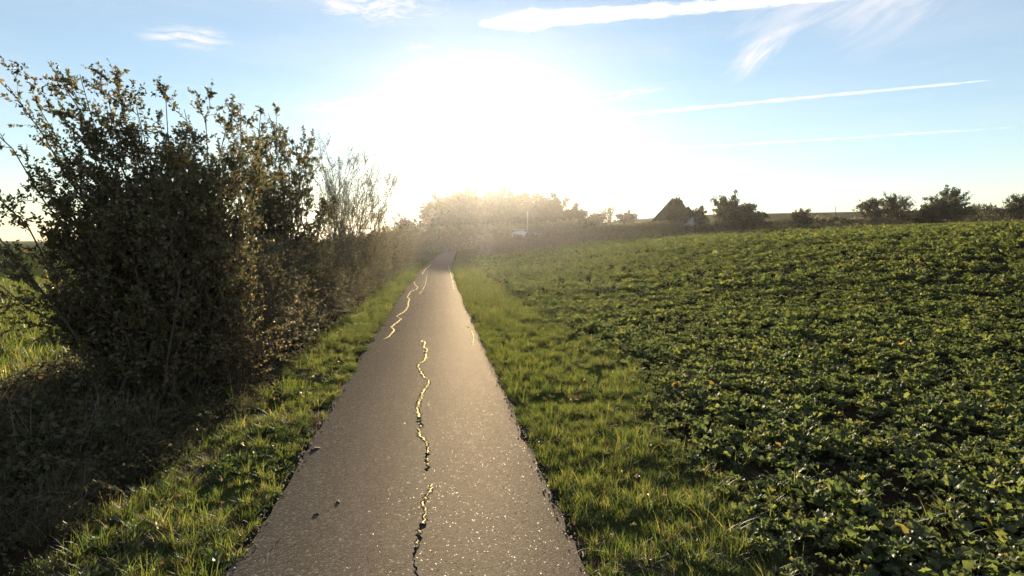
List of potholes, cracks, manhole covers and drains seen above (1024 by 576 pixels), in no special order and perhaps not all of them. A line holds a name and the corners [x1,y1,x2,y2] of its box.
crack [465,311,475,345]
crack [384,264,434,576]
